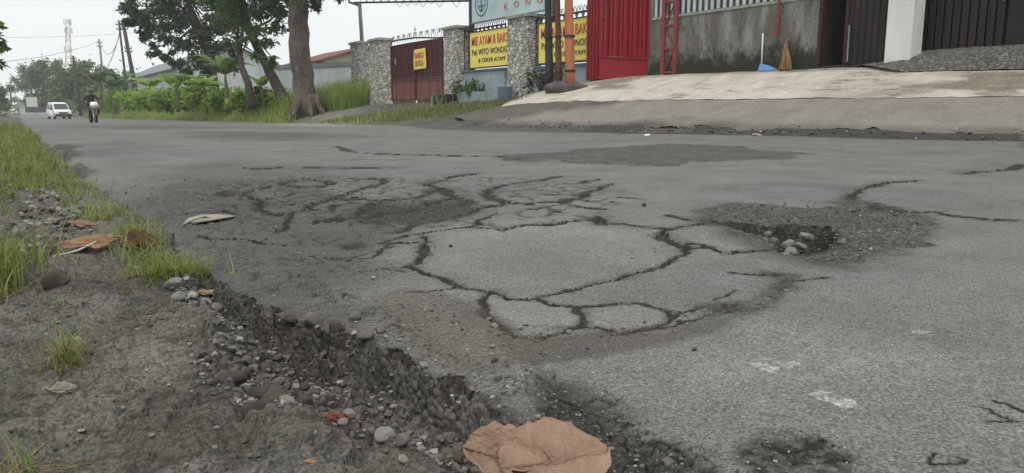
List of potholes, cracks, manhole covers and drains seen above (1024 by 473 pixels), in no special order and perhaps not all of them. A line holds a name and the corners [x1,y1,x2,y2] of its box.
crack [901,209,1005,221]
crack [847,180,917,200]
crack [197,146,775,341]
crack [962,164,1023,175]
pothole [710,219,839,255]
crack [928,453,968,466]
crack [974,400,1024,423]
